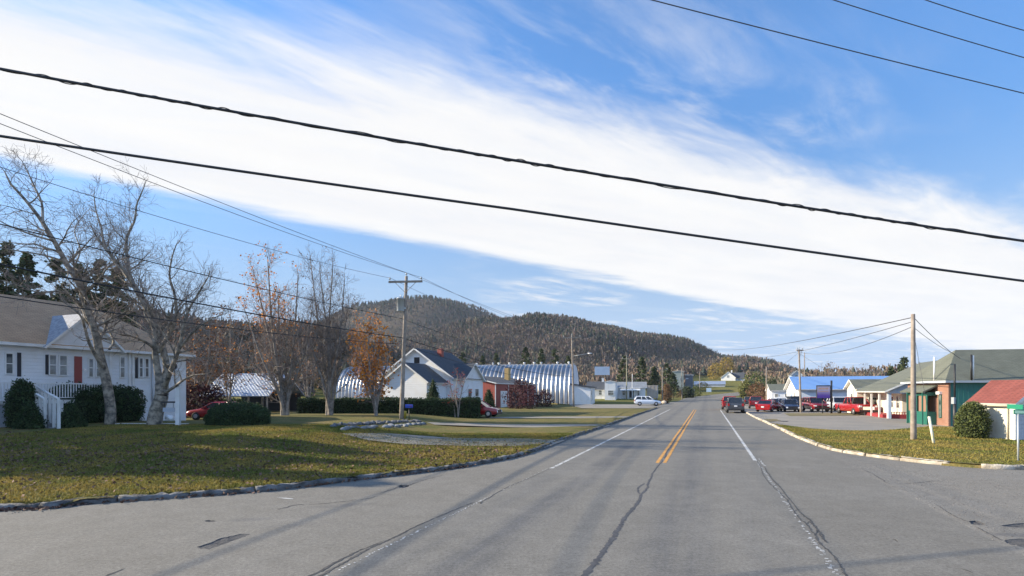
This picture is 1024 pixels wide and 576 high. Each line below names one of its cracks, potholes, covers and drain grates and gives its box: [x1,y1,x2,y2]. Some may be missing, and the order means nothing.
crack [757,461,848,576]
